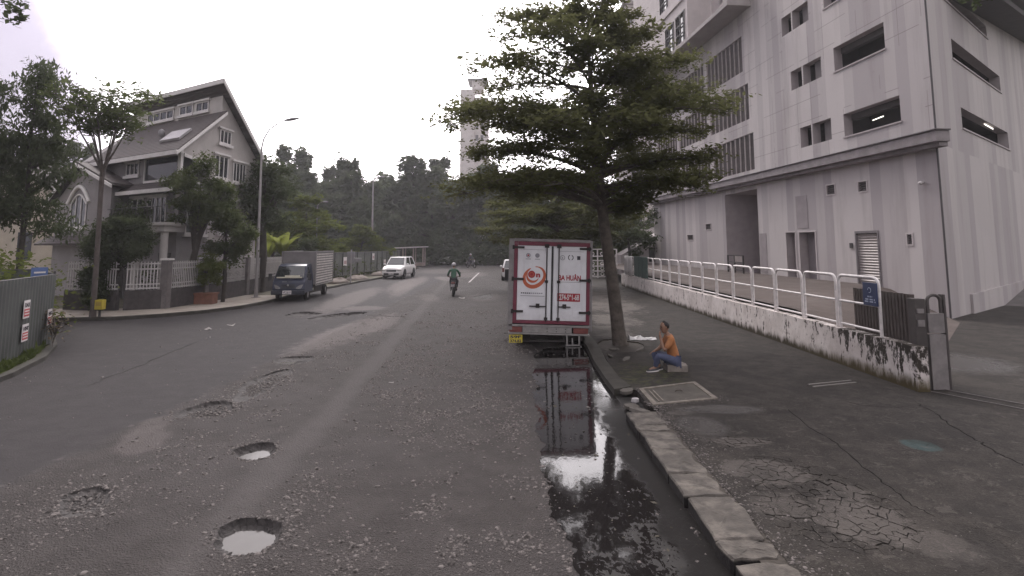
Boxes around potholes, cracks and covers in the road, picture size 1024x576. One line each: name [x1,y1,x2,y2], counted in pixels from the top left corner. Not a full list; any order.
pothole [58,487,111,517]
pothole [233,369,294,402]
pothole [307,312,367,320]
pothole [173,400,235,418]
crack [712,409,935,554]
manhole cover [639,381,718,405]
pothole [232,442,278,460]
pothole [213,517,283,555]
crack [847,397,1023,466]
crack [88,337,209,386]
